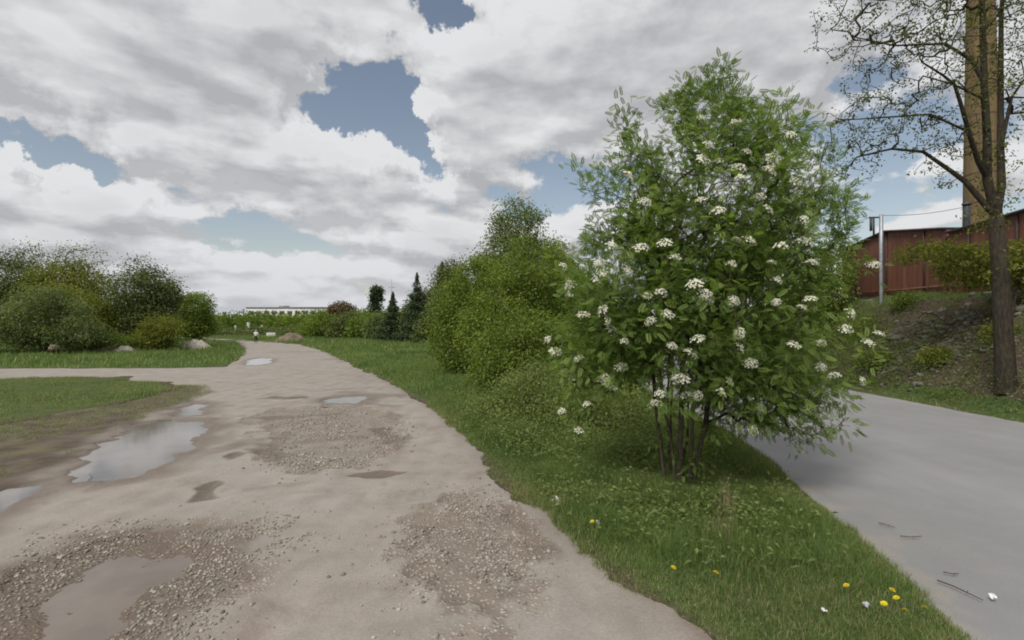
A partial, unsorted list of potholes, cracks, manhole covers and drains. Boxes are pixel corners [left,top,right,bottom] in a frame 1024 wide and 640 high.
pothole [64,417,218,484]
pothole [160,401,214,421]
pothole [0,532,225,640]
pothole [0,473,94,512]
pothole [319,395,372,407]
